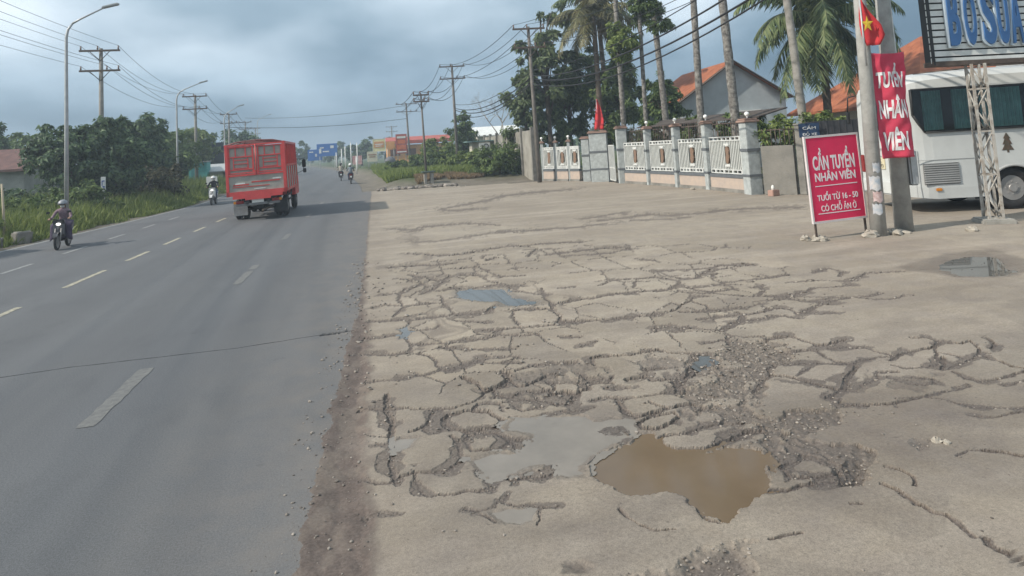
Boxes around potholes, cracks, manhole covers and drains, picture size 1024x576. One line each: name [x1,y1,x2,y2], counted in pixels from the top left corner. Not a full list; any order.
pothole [396,325,415,340]
pothole [939,257,1024,277]
crack [0,188,1024,568]
pothole [589,429,781,523]
pothole [454,288,544,309]
